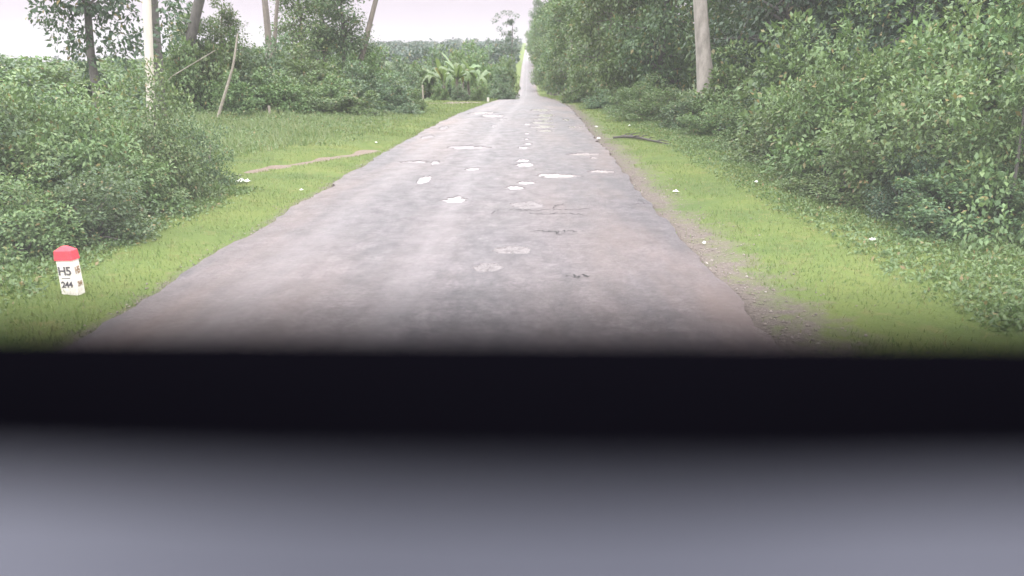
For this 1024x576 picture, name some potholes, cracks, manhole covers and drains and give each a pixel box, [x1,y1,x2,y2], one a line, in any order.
pothole [473,263,504,272]
crack [491,203,585,234]
pothole [509,201,545,209]
pothole [492,246,531,254]
